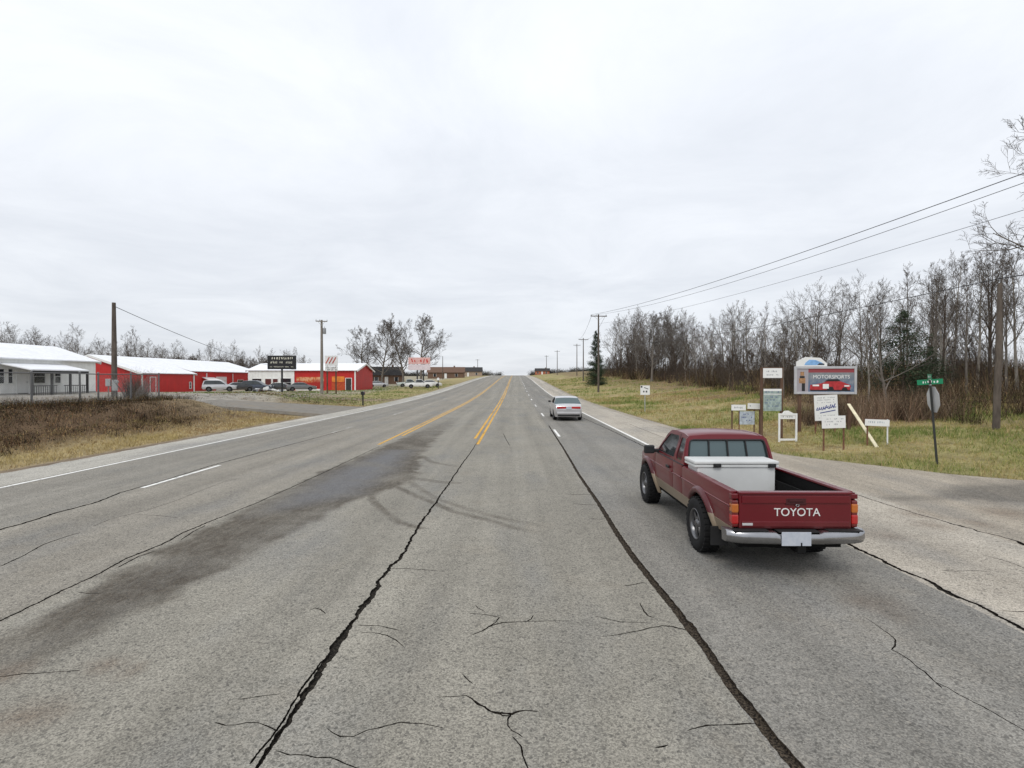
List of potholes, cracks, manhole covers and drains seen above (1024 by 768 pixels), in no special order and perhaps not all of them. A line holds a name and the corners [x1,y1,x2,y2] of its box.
crack [866,618,1024,731]
crack [215,443,539,768]
crack [596,604,685,637]
crack [1,481,225,566]
